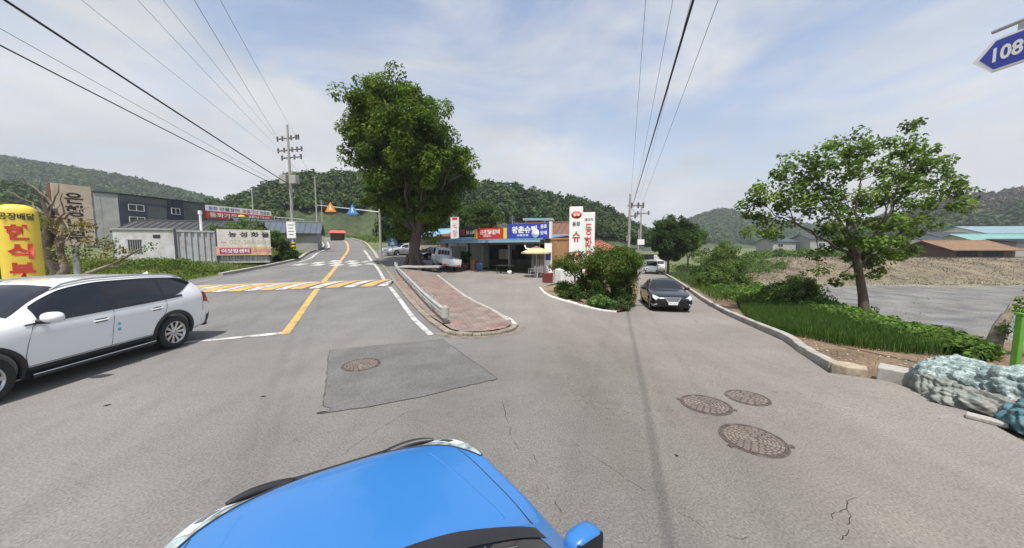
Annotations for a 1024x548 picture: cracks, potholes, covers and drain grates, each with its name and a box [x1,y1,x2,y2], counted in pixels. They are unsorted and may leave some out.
manhole cover [718,423,795,459]
manhole cover [341,358,381,372]
manhole cover [724,390,772,406]
crack [830,497,857,540]
manhole cover [676,394,737,416]
